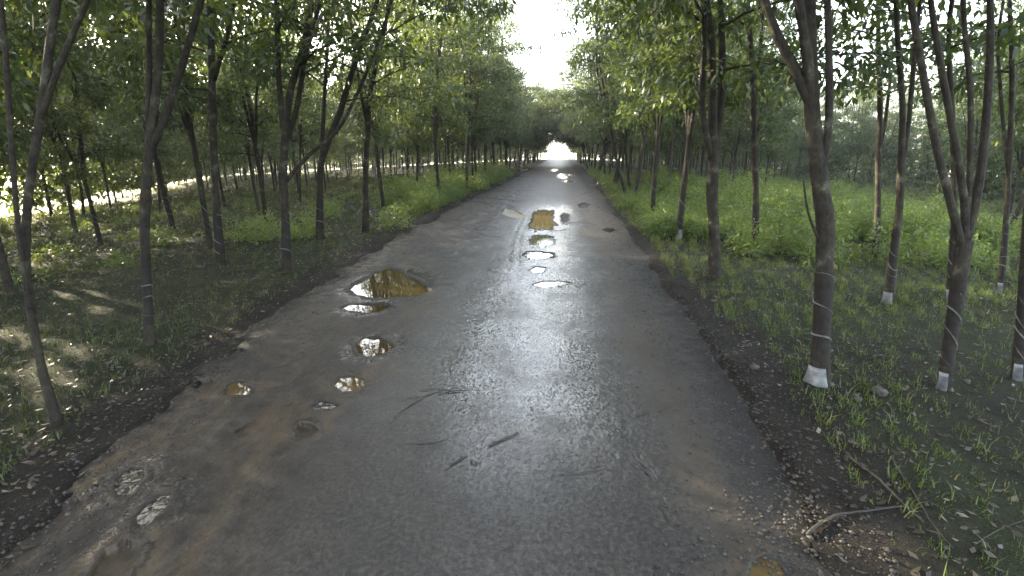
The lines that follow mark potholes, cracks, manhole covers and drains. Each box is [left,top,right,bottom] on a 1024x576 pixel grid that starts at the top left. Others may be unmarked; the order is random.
pothole [530,280,576,289]
pothole [342,265,434,301]
pothole [520,250,558,260]
pothole [102,460,157,502]
pothole [527,265,548,274]
crack [388,387,482,472]
pothole [304,398,344,415]
pothole [113,483,185,545]
pothole [735,548,794,576]
pothole [526,234,557,249]
pothole [334,301,397,315]
pothole [284,417,325,444]
